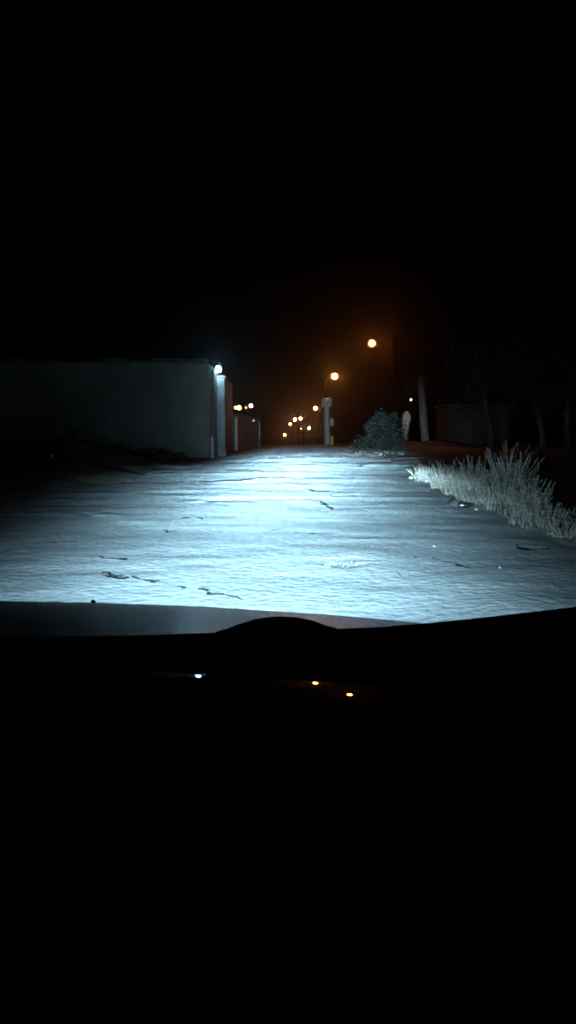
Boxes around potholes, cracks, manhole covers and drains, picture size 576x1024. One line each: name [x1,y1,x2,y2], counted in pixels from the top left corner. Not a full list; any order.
crack [397,556,471,585]
crack [98,556,244,600]
